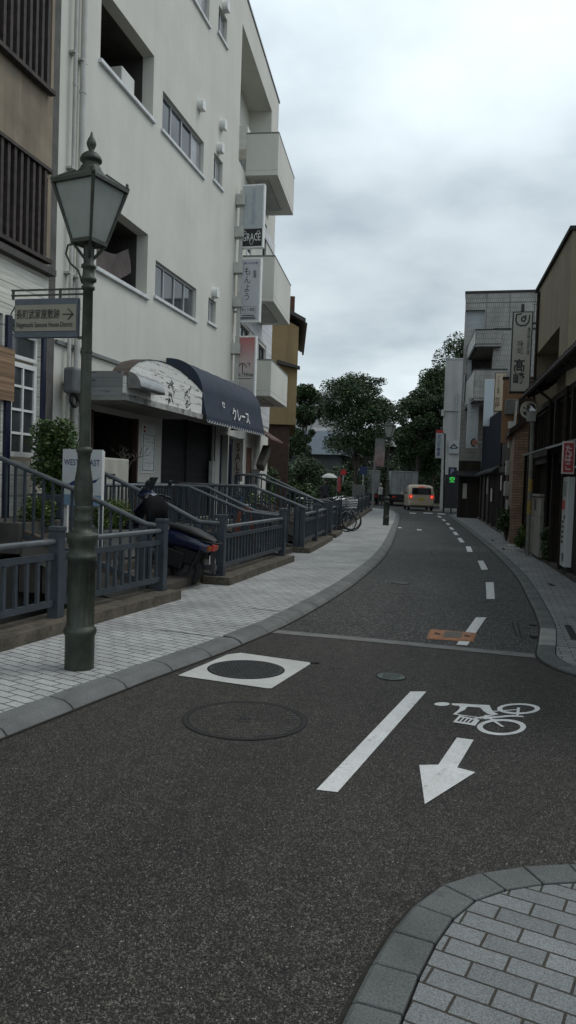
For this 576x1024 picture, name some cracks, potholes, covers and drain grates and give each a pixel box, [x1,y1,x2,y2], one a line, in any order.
manhole cover [376,673,407,681]
manhole cover [179,653,310,688]
manhole cover [182,701,307,740]
